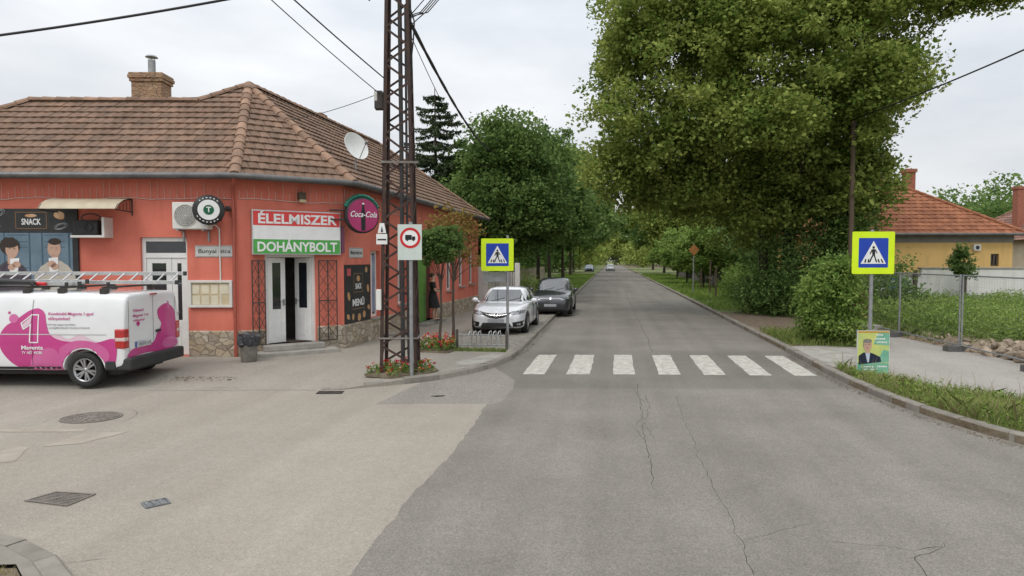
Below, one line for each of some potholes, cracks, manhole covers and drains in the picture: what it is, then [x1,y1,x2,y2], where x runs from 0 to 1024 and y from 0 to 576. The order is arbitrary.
manhole cover [59,411,123,424]
crack [633,384,655,485]
crack [832,541,945,576]
crack [676,397,805,575]
